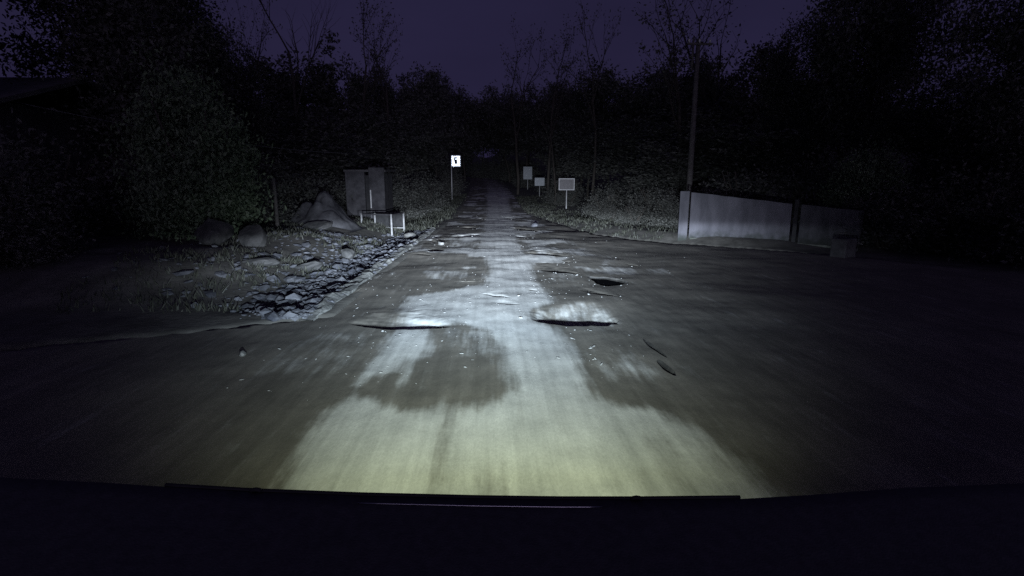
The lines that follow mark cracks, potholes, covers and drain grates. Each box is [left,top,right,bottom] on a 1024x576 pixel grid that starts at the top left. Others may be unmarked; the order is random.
pothole [536,261,583,275]
pothole [345,301,460,330]
pothole [525,300,619,327]
pothole [588,276,629,286]
pothole [657,360,676,376]
